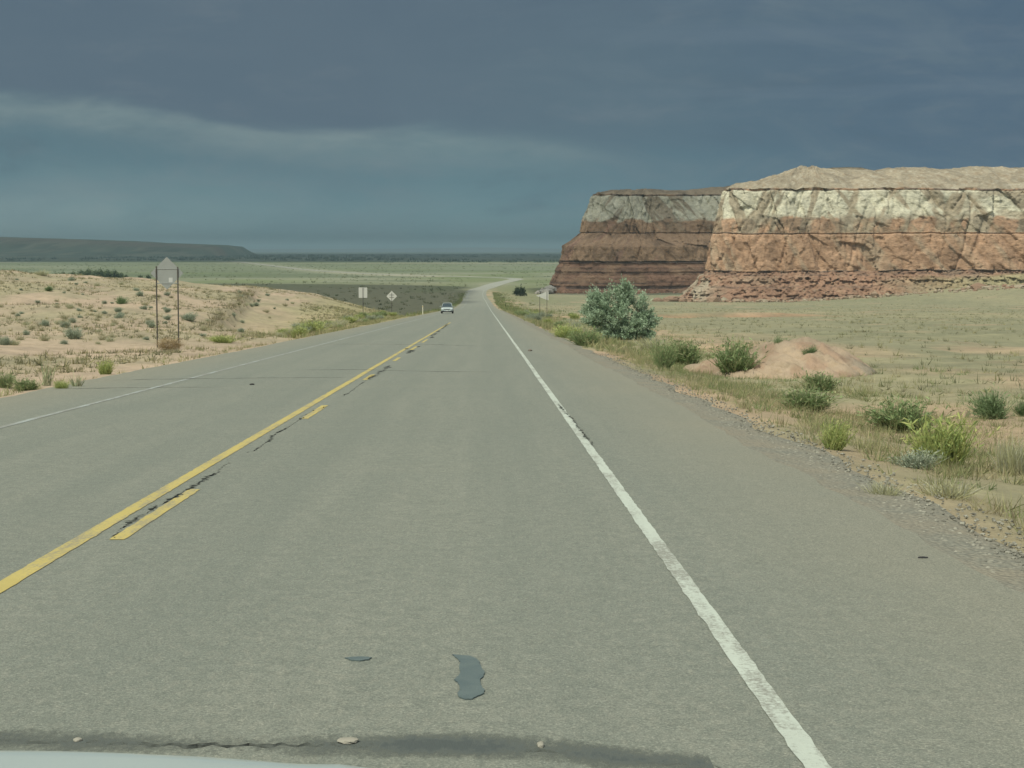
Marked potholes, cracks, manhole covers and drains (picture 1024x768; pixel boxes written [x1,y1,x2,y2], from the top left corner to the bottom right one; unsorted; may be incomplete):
crack [559,405,593,445]
crack [112,407,324,538]
